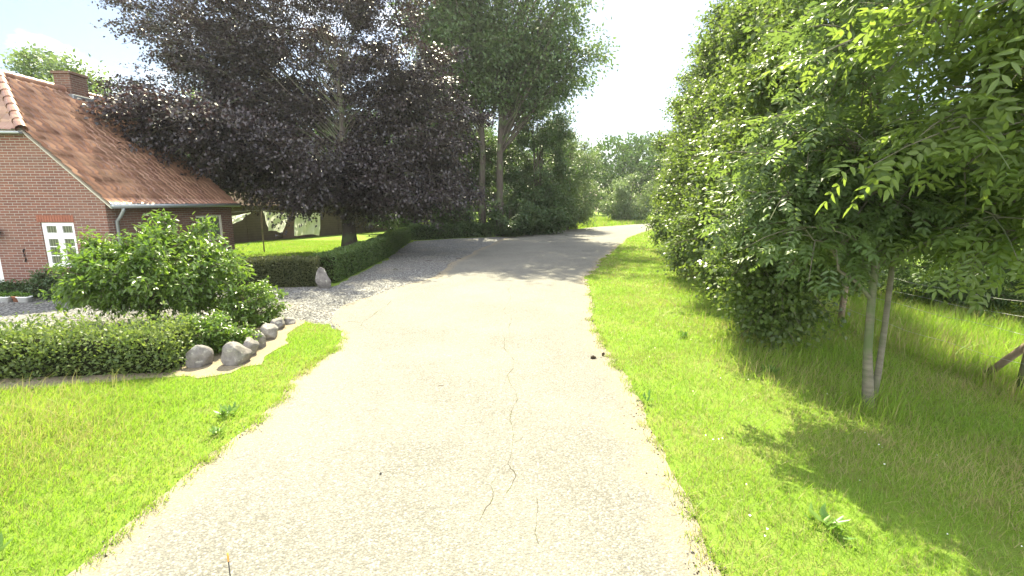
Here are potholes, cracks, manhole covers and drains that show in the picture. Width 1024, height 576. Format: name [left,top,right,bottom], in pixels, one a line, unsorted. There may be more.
crack [480,295,521,519]
